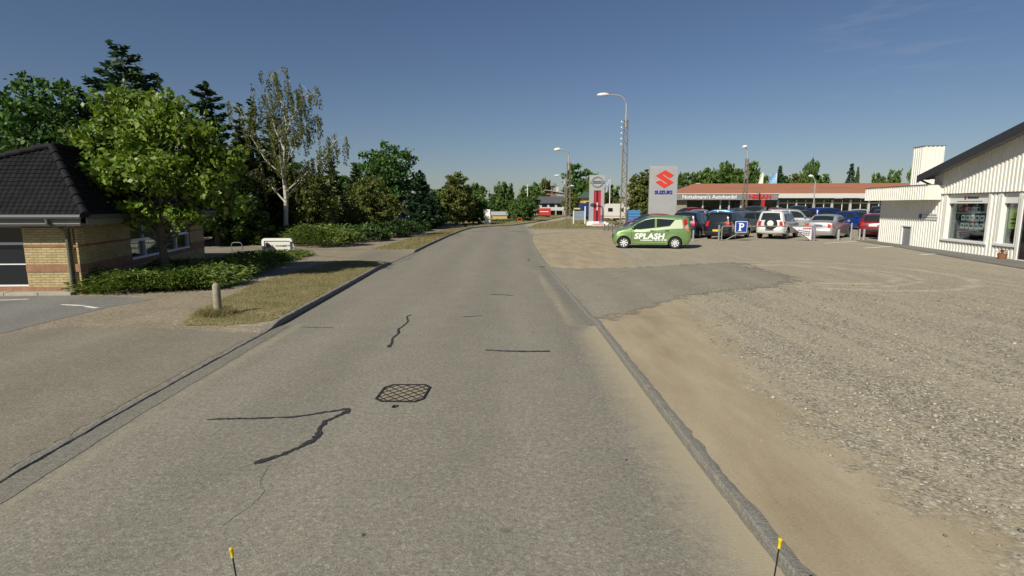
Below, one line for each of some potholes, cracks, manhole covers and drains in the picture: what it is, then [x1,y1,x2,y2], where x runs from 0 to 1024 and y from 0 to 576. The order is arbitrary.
crack [387,315,411,347]
crack [172,408,473,525]
